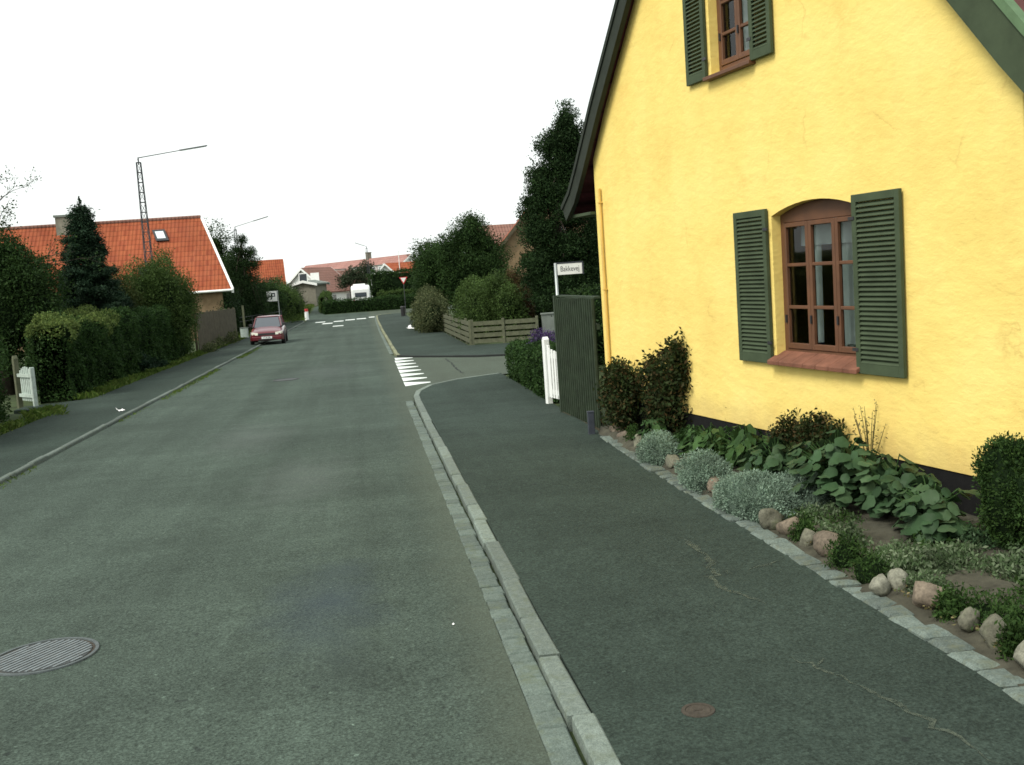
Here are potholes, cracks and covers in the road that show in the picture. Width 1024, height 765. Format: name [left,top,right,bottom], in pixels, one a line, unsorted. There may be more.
crack [790,656,999,763]
utility cover [681,703,715,718]
crack [681,537,765,603]
